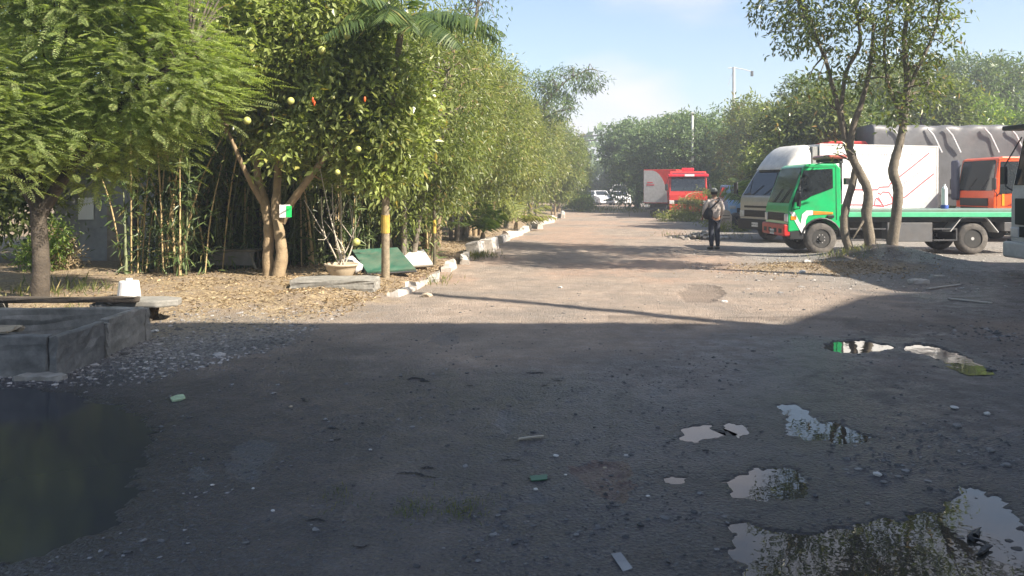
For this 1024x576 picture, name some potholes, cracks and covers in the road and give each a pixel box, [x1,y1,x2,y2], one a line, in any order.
pothole [722,465,812,502]
pothole [823,338,896,354]
pothole [664,475,690,484]
pothole [903,342,995,376]
pothole [679,421,731,443]
pothole [776,403,878,444]
pothole [721,421,752,438]
pothole [728,484,1024,576]
